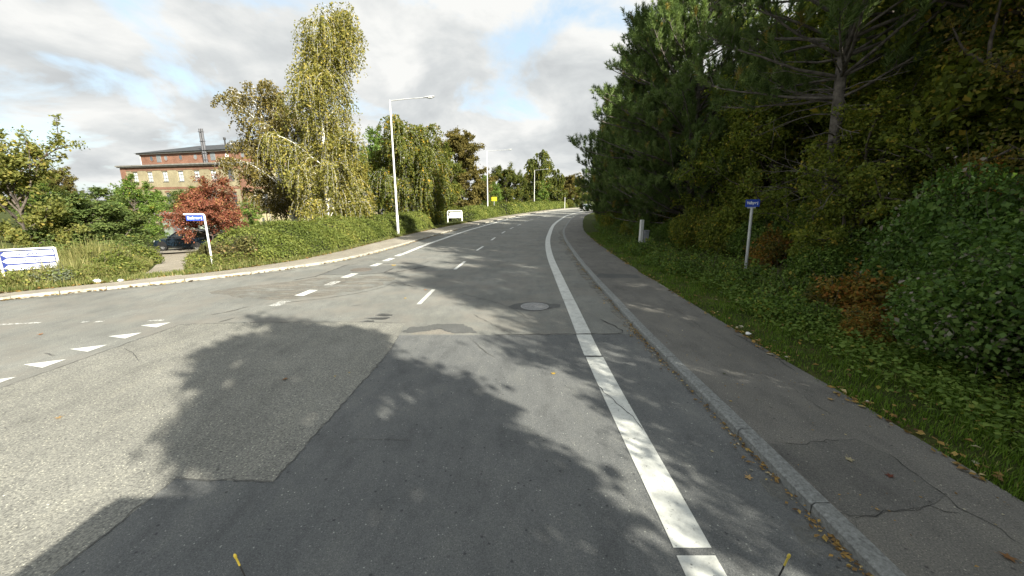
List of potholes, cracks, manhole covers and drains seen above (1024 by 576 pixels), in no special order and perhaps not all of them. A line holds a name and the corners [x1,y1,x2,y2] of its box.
crack [840,455,1019,543]
crack [461,293,623,354]
